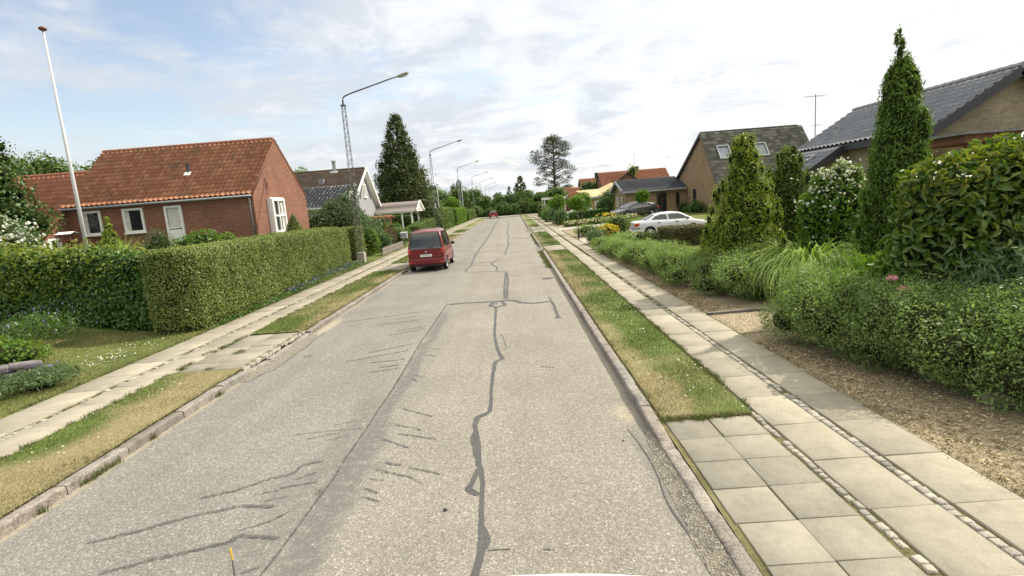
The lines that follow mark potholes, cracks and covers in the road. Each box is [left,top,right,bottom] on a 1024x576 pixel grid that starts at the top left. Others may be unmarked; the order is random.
crack [628,429,708,570]
